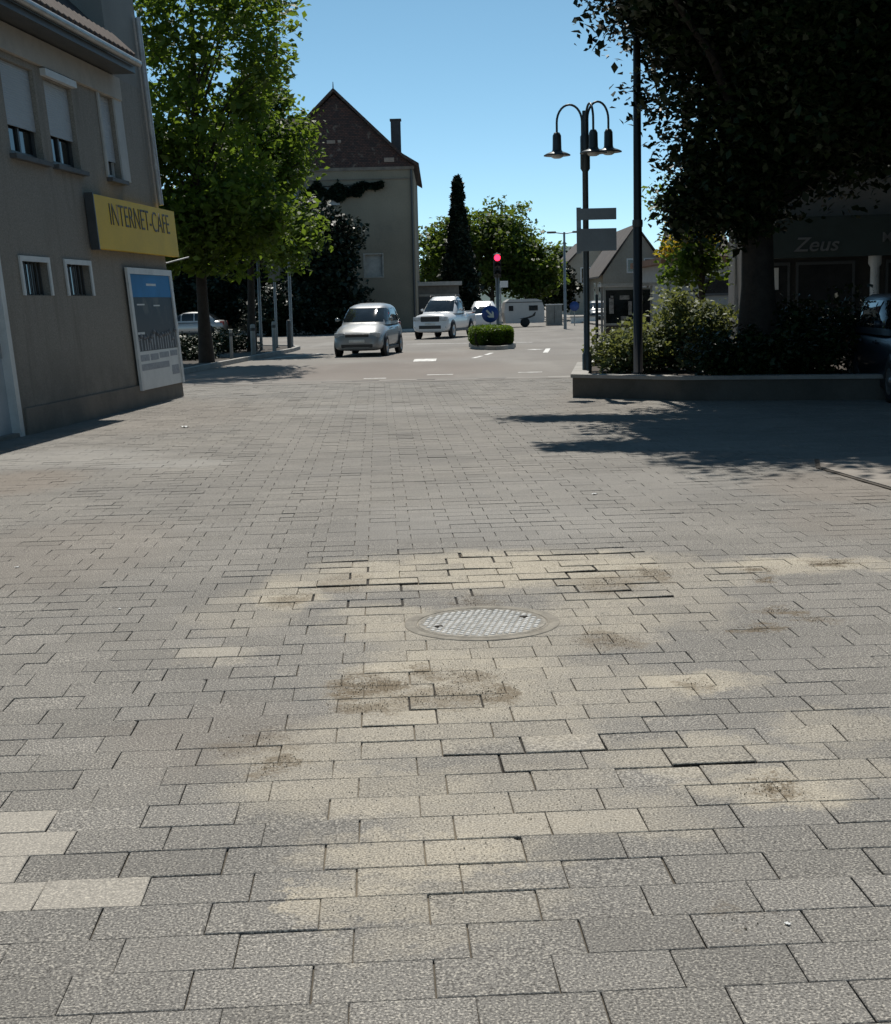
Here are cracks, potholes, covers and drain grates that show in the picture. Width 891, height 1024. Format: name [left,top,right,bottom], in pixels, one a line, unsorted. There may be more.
manhole cover [404,606,560,642]
